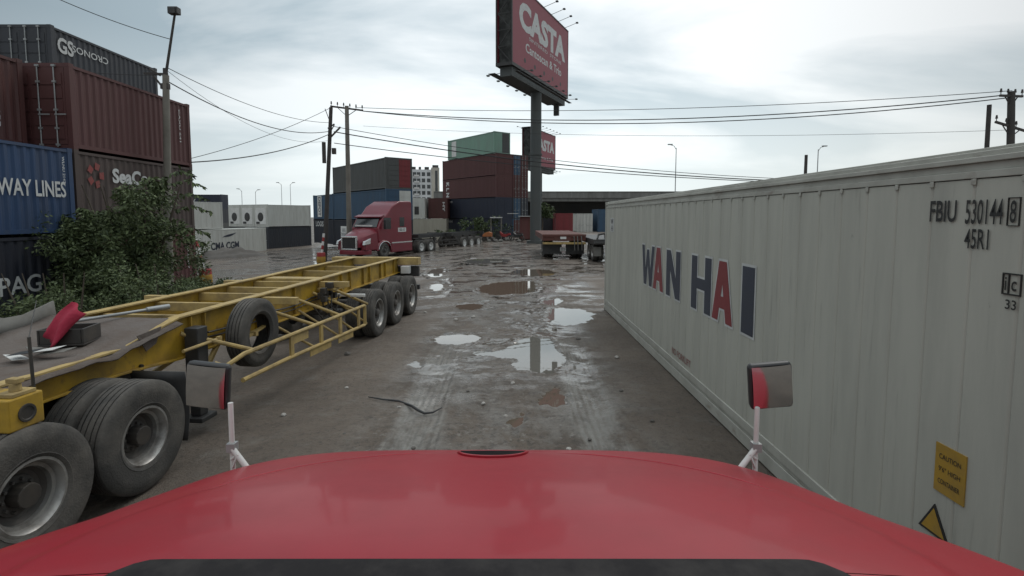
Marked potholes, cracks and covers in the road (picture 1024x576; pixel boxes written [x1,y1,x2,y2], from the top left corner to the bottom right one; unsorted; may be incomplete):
pothole [538,306,604,327]
pothole [472,280,544,297]
pothole [462,334,580,377]
pothole [423,331,491,347]
pothole [447,302,492,312]
pothole [422,282,449,292]
pothole [507,268,562,277]
